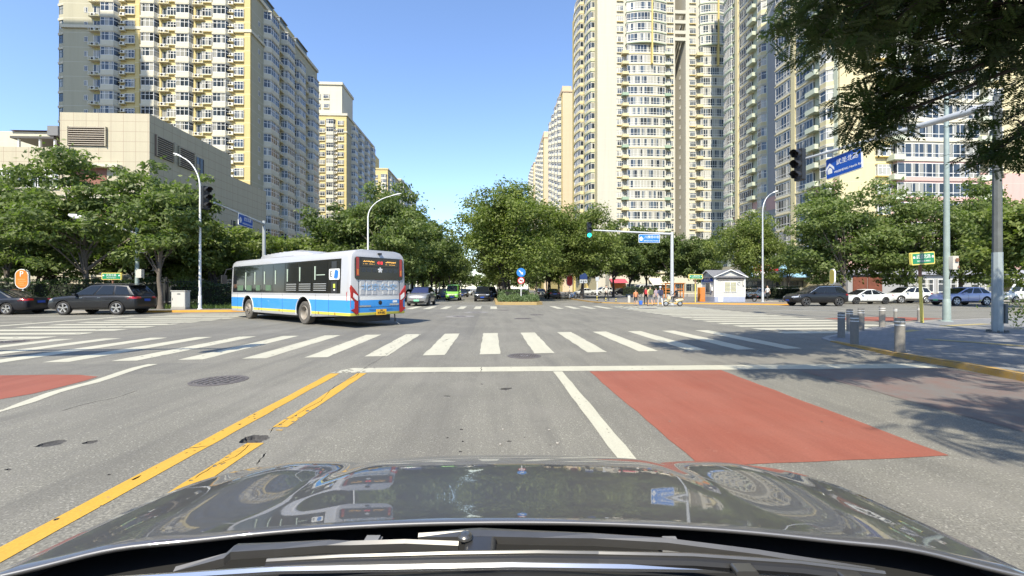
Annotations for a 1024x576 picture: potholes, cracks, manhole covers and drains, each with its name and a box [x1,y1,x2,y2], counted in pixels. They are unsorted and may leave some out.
pothole [239,435,270,443]
manhole cover [187,375,249,386]
